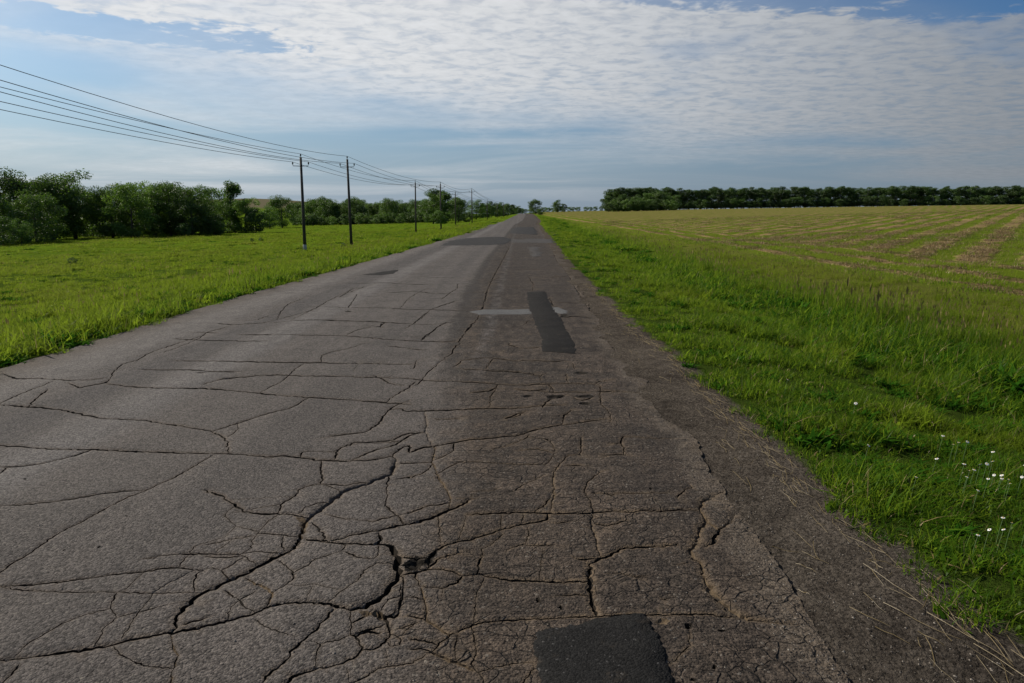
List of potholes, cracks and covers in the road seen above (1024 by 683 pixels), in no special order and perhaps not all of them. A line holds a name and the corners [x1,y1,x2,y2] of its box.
pothole [401,552,438,574]
crack [0,277,763,683]
